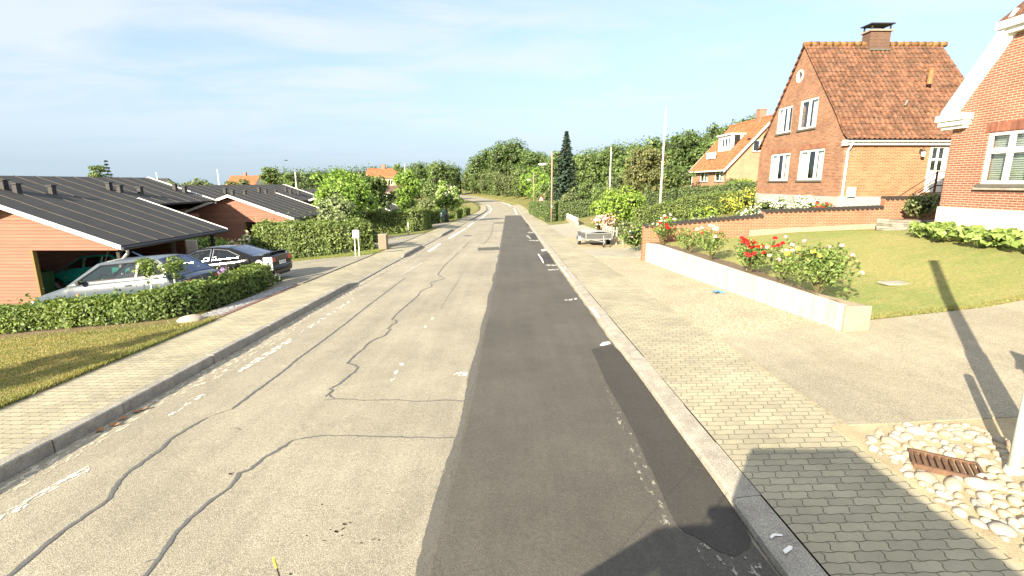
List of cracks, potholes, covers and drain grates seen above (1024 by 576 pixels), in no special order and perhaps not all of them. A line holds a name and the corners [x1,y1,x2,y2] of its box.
drain grate [908,448,988,480]
